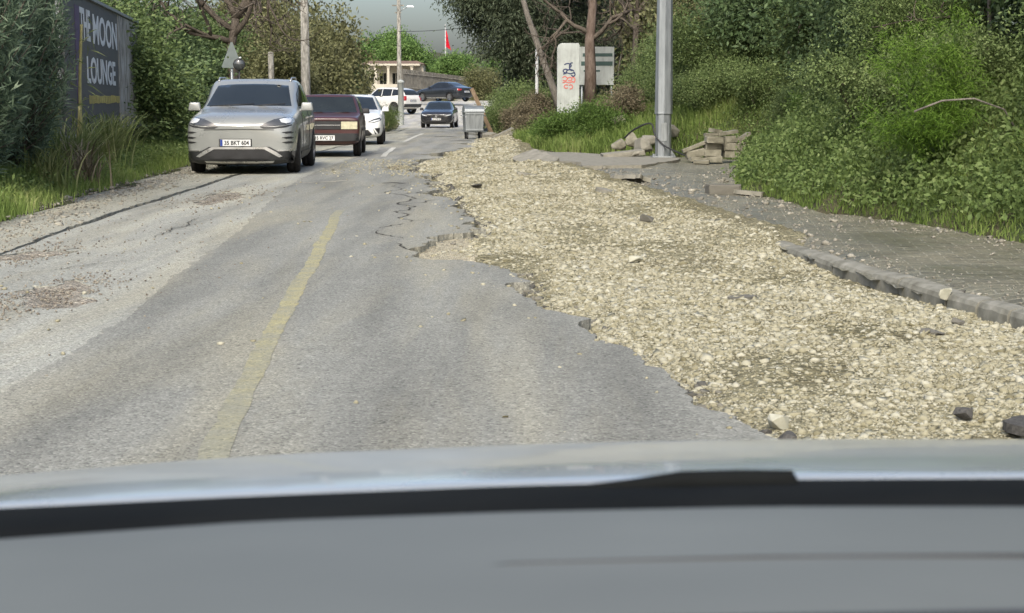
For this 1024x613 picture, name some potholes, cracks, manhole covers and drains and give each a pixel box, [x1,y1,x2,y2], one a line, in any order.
crack [375,182,438,249]
crack [33,167,266,244]
pothole [16,280,95,309]
pothole [195,192,244,206]
